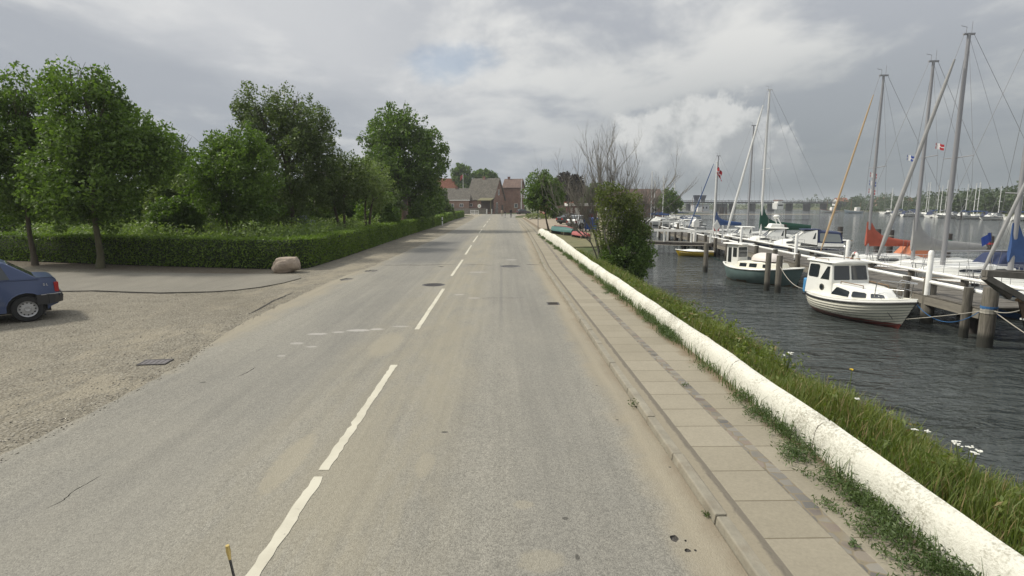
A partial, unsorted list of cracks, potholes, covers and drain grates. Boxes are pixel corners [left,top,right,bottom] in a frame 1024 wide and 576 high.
crack [64,285,291,314]
